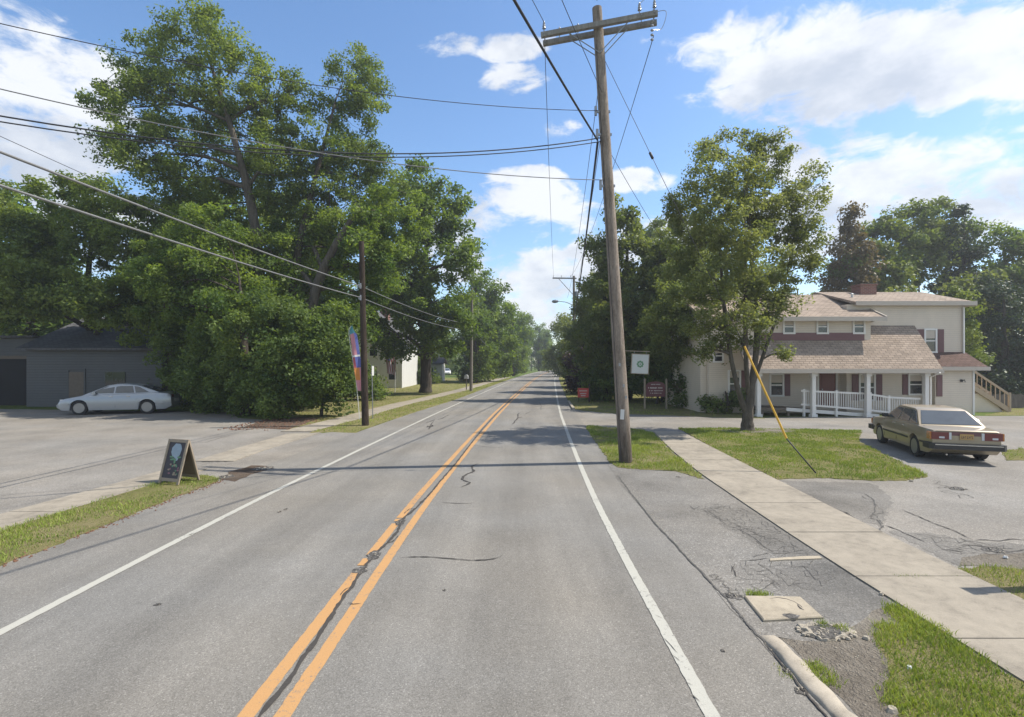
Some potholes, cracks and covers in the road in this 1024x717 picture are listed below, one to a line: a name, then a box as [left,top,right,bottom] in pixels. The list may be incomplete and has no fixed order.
manhole cover [744,596,823,622]
crack [839,493,1024,554]
crack [690,504,836,595]
